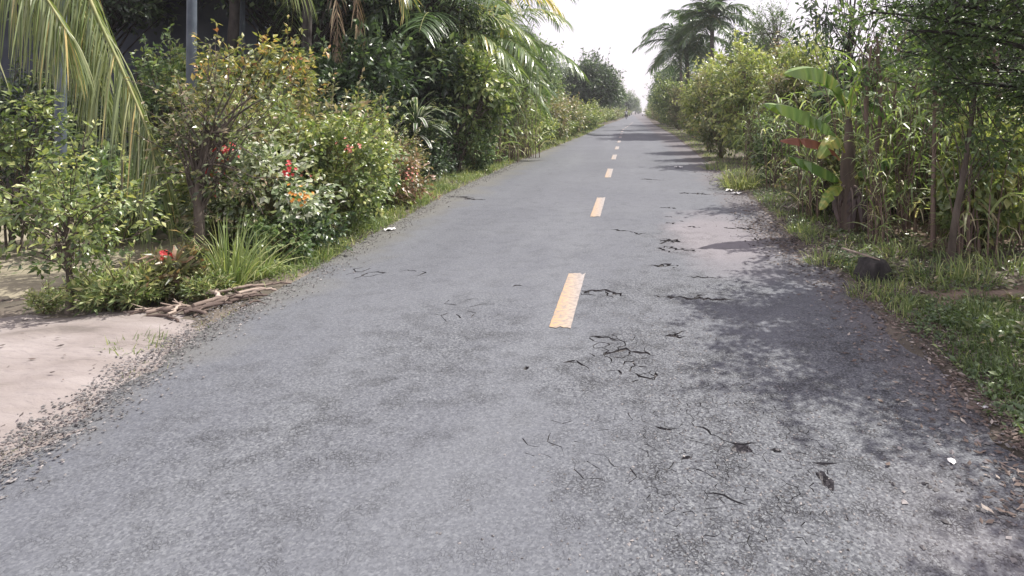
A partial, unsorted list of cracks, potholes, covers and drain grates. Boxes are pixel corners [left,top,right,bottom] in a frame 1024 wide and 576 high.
crack [523,414,637,484]
crack [639,376,849,547]
crack [581,289,626,298]
crack [650,192,726,278]
crack [350,267,427,278]
crack [563,330,686,382]
